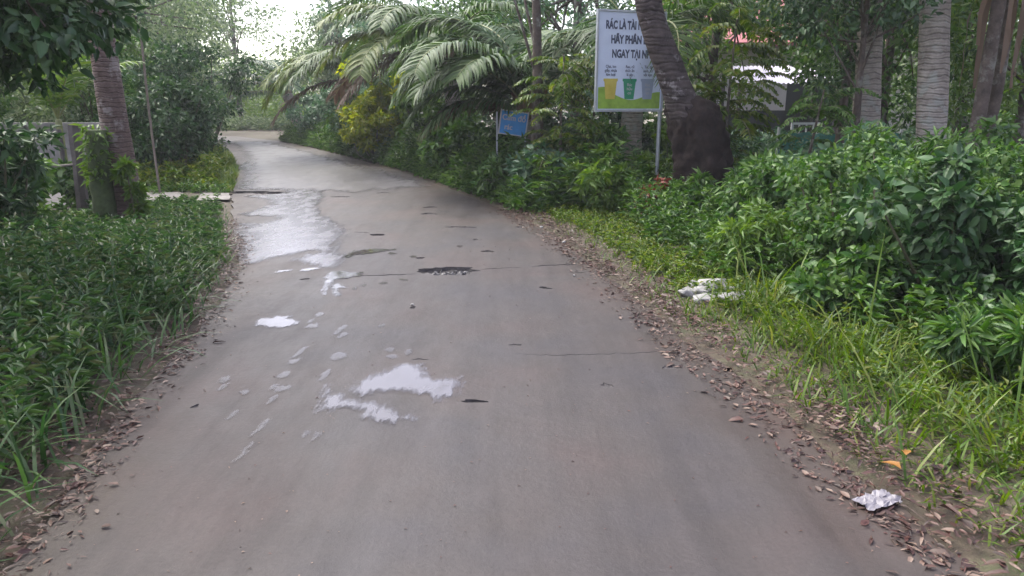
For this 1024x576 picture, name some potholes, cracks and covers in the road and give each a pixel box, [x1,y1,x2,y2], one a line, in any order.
pothole [417,267,480,275]
